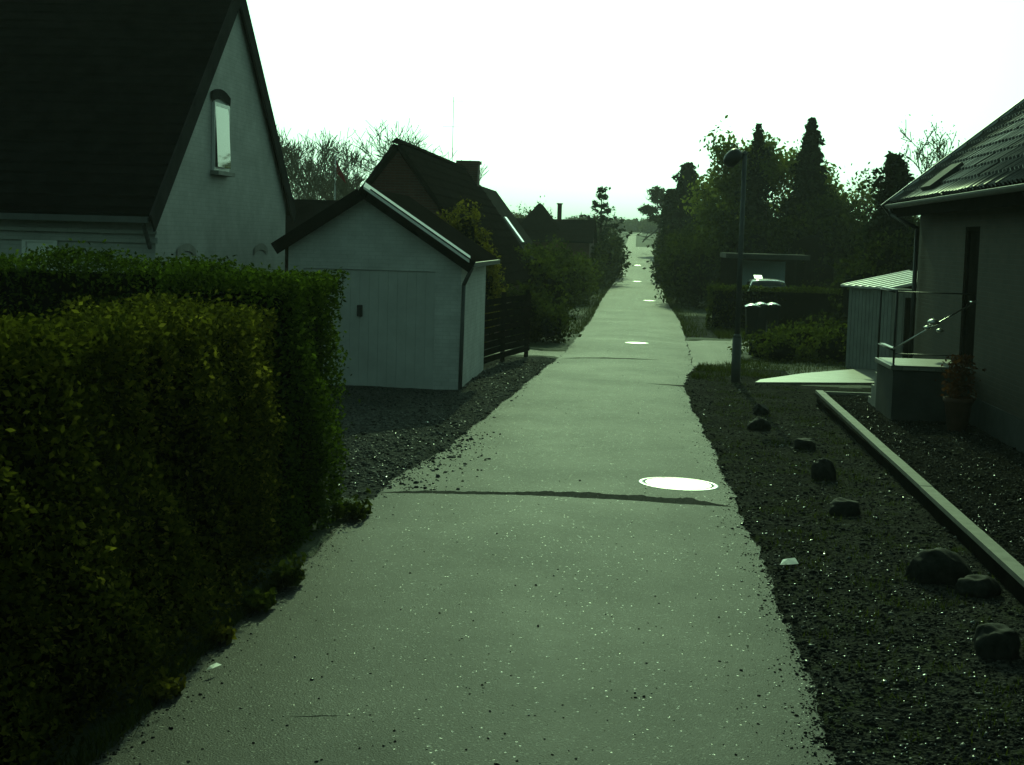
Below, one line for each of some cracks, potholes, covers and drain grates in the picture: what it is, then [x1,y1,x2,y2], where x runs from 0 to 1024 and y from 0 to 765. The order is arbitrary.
manhole cover [638,477,719,491]
